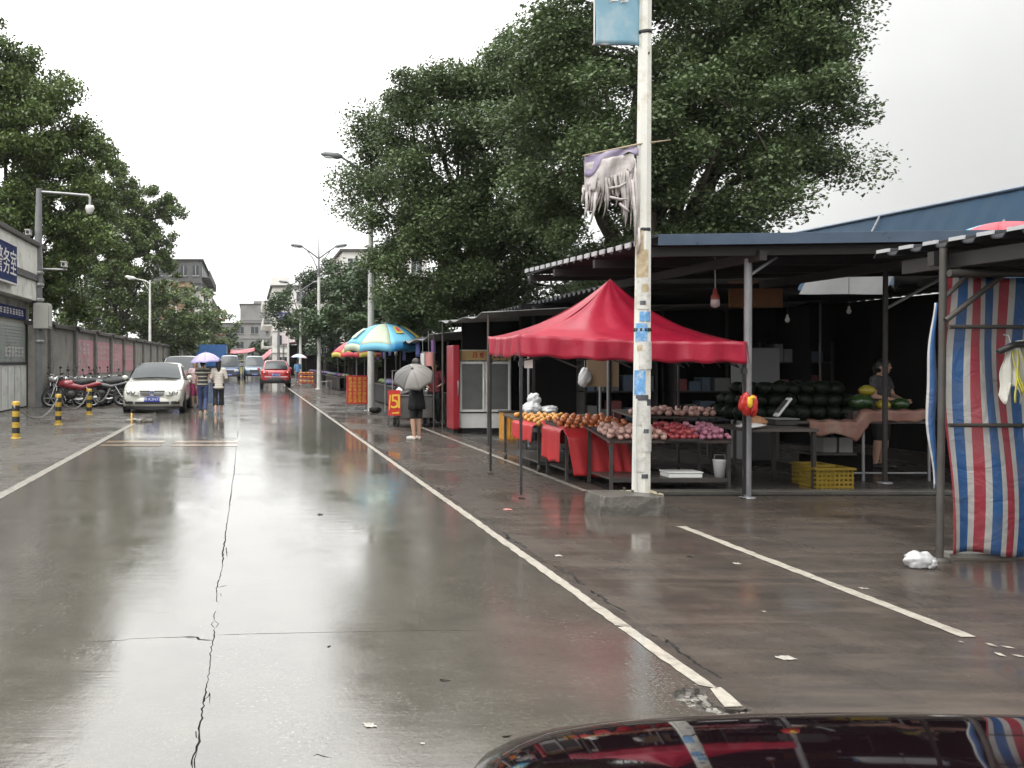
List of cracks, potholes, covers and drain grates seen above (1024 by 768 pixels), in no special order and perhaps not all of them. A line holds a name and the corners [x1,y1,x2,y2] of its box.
crack [191,434,238,768]
pothole [672,687,752,714]
crack [554,566,626,612]
crack [650,634,722,679]
